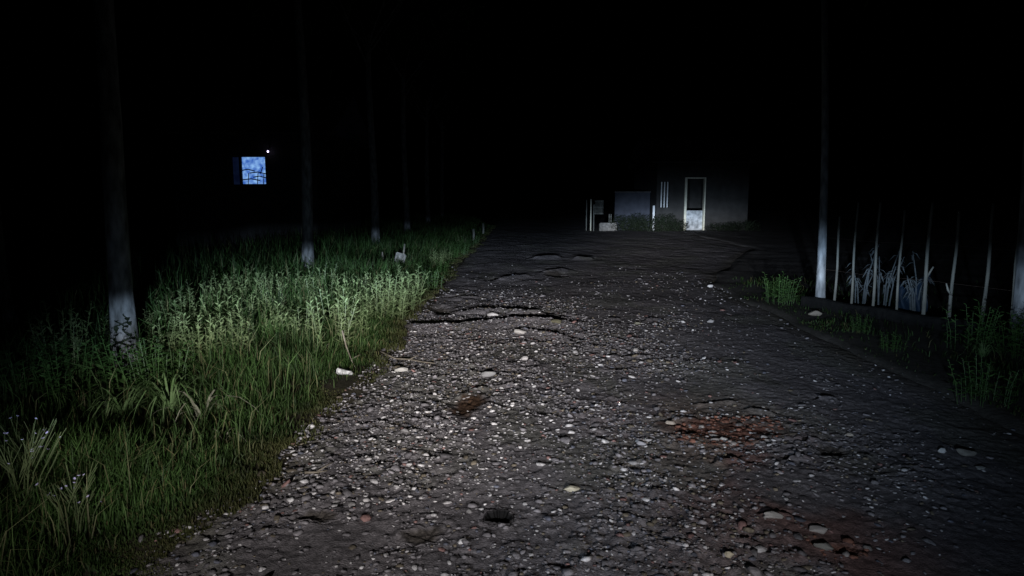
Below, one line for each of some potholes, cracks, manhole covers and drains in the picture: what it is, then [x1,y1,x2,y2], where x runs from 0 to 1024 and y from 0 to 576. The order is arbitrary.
pothole [654,416,789,447]
pothole [446,392,492,422]
pothole [483,508,514,526]
